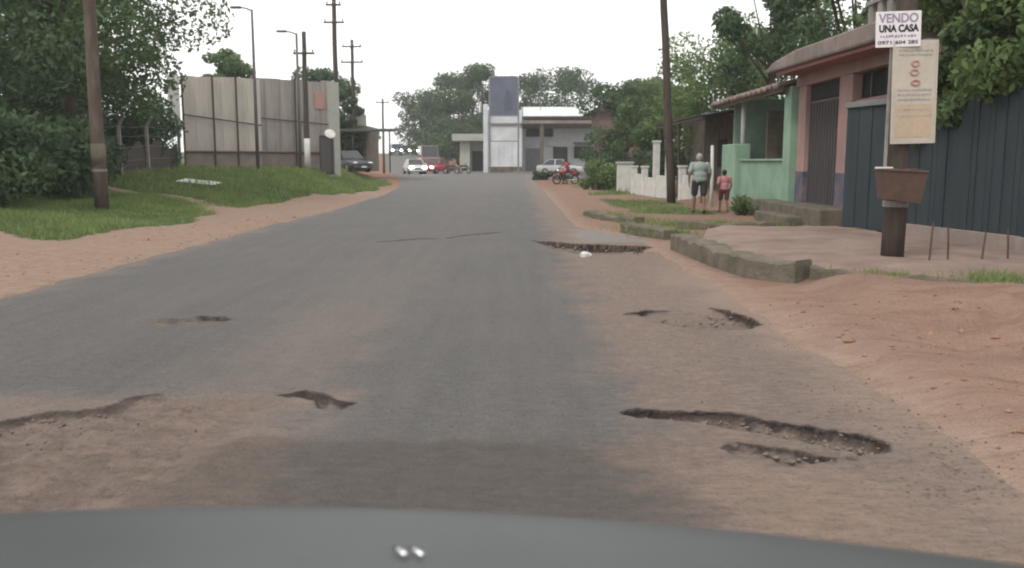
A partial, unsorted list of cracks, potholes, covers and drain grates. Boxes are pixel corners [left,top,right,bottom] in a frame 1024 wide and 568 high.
pothole [122,313,253,332]
pothole [586,402,941,472]
pothole [520,239,661,257]
pothole [604,305,777,338]
pothole [252,383,389,419]
